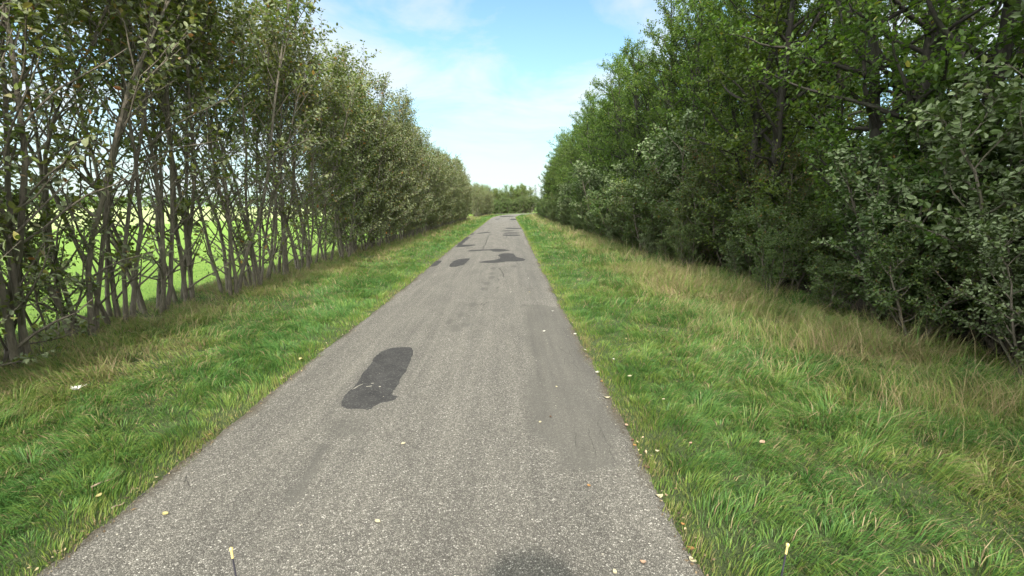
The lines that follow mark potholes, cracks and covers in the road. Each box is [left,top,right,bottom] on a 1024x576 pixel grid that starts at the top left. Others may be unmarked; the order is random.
crack [575,418,628,465]
